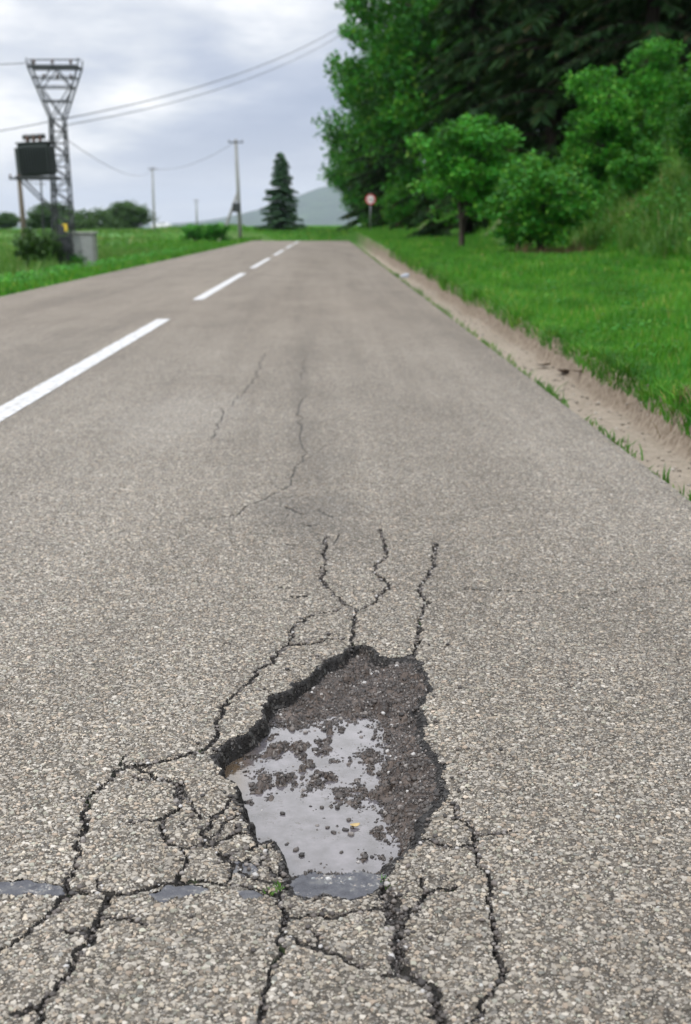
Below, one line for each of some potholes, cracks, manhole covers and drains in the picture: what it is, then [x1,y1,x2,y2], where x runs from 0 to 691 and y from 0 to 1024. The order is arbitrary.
crack [0,529,515,1024]
pothole [207,644,450,902]
crack [211,354,266,439]
crack [221,396,324,518]
